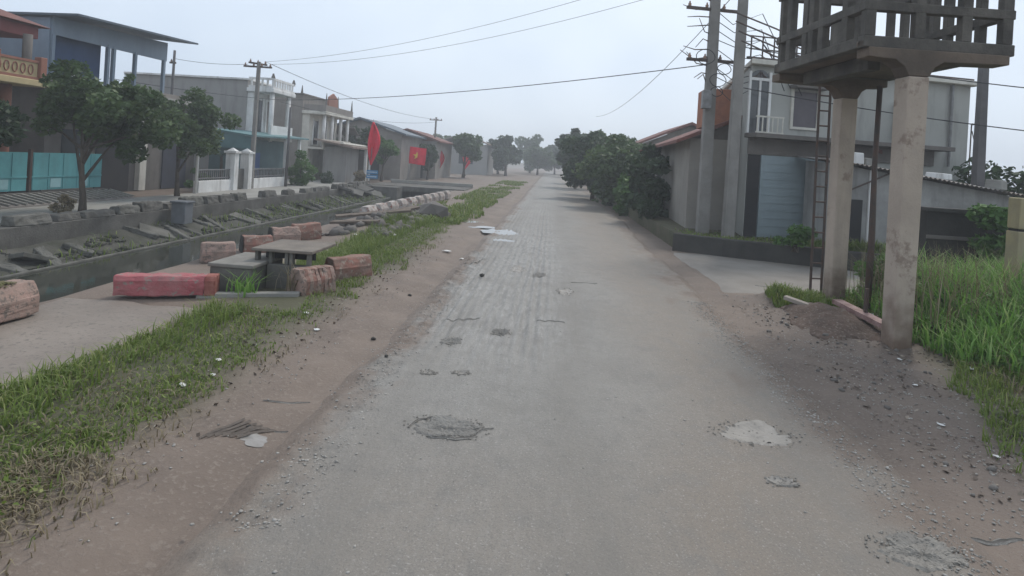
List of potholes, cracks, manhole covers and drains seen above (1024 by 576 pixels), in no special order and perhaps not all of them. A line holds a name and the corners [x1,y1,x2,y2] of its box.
pothole [764,474,801,487]
pothole [491,328,512,336]
pothole [439,336,462,346]
crack [970,537,1024,546]
pothole [864,529,987,576]
pothole [403,414,490,440]
